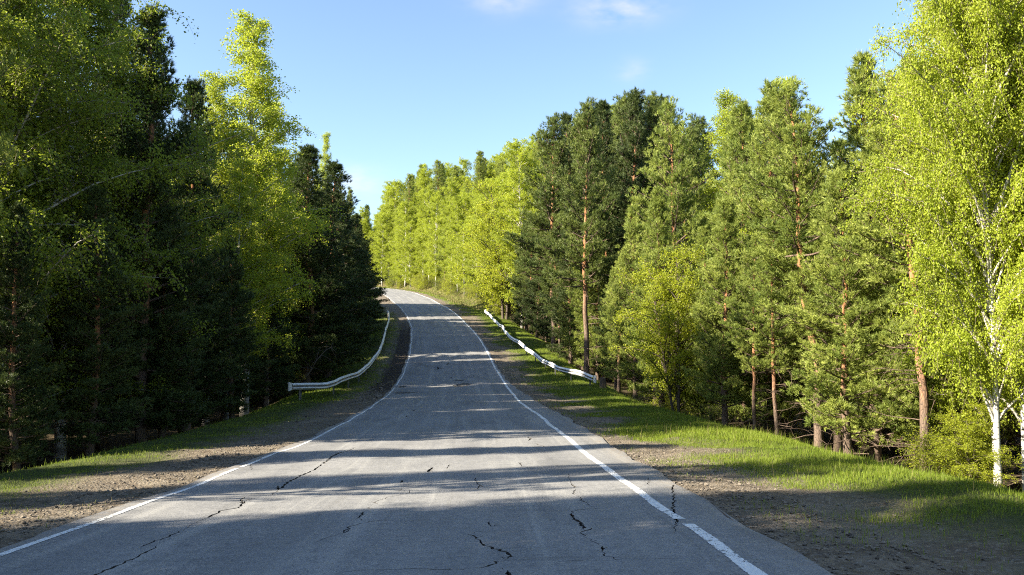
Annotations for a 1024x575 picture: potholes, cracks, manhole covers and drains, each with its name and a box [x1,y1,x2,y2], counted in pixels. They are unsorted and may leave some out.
crack [317,480,410,542]
crack [671,485,679,532]
crack [94,448,354,575]
crack [349,522,519,575]
crack [568,474,671,561]
